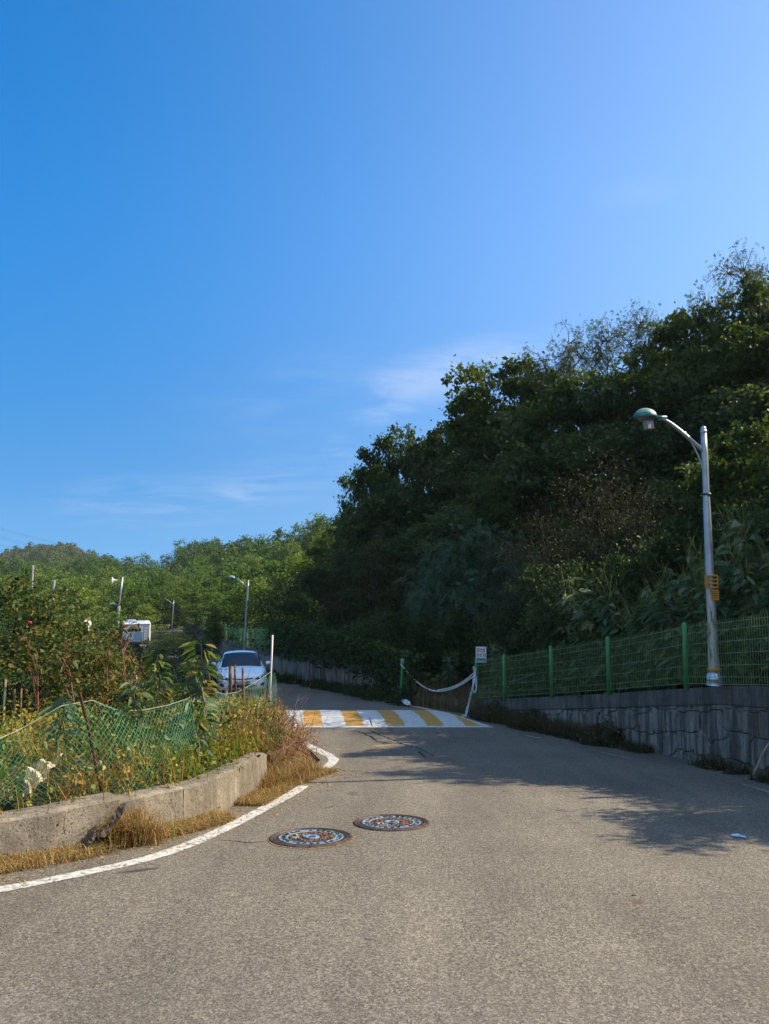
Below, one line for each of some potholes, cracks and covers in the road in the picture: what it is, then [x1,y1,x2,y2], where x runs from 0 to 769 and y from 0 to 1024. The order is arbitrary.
manhole cover [267,828,355,849]
manhole cover [354,814,430,831]
crack [355,718,455,757]
